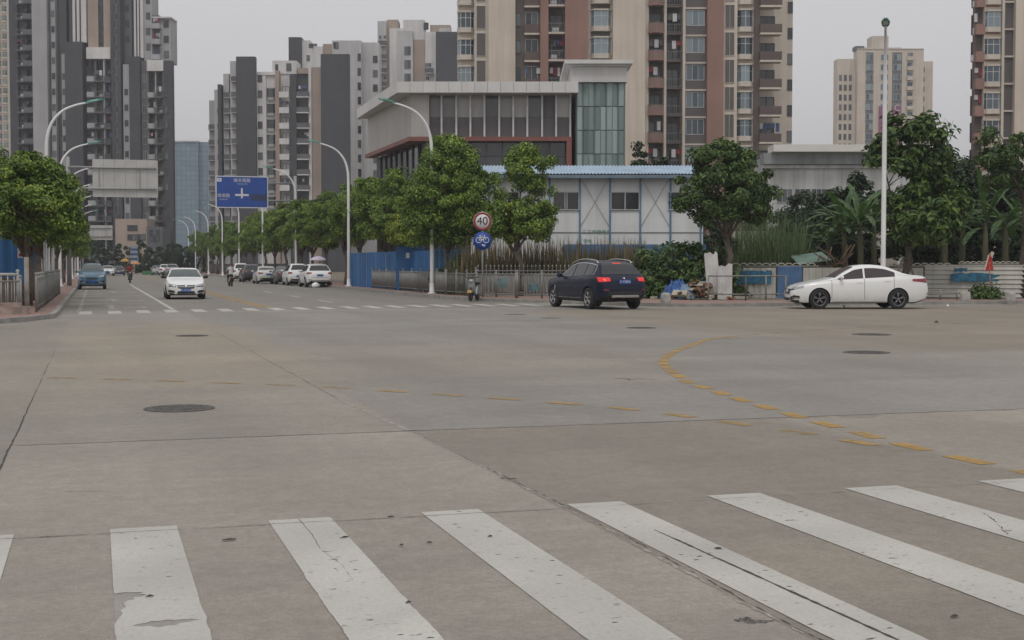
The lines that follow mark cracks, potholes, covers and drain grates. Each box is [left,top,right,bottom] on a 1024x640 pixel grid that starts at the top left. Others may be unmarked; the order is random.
manhole cover [144,404,215,412]
